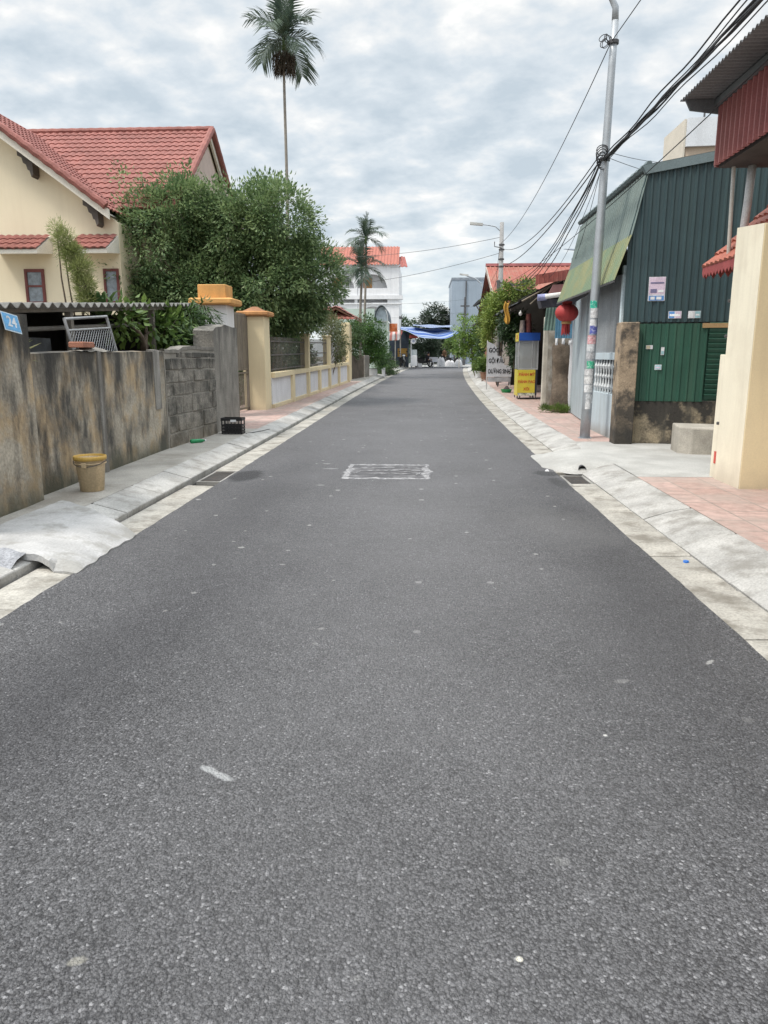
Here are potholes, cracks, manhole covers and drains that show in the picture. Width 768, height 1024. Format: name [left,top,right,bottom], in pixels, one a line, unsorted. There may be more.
drain grate [196,471,237,485]
drain grate [559,475,593,487]
